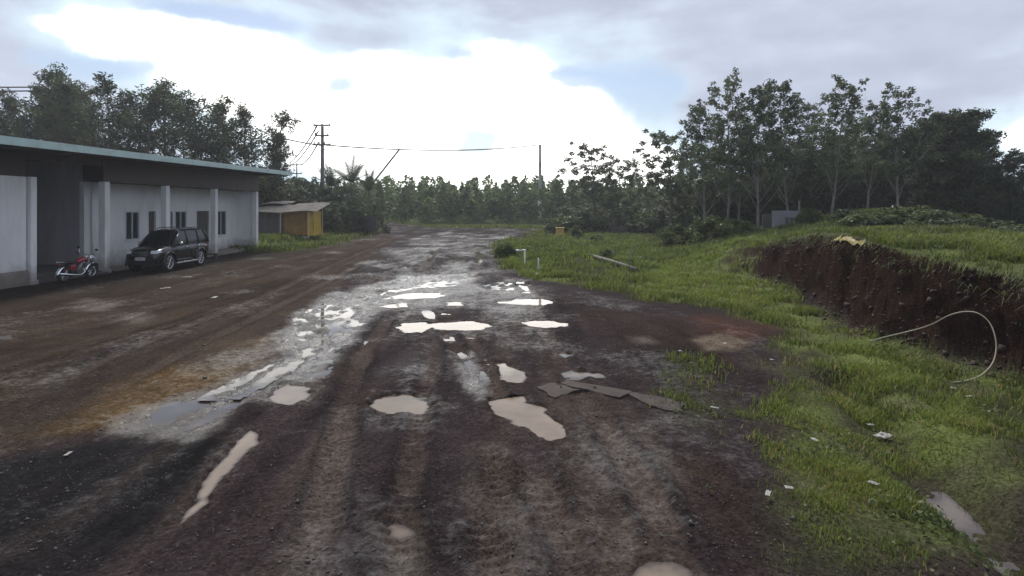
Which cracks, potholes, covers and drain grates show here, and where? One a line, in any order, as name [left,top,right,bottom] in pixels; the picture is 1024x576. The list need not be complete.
pothole [466,354,554,395]
pothole [373,316,514,339]
pothole [459,386,598,455]
pothole [461,295,573,310]
pothole [339,384,460,426]
pothole [501,315,593,335]
pothole [241,373,342,416]
